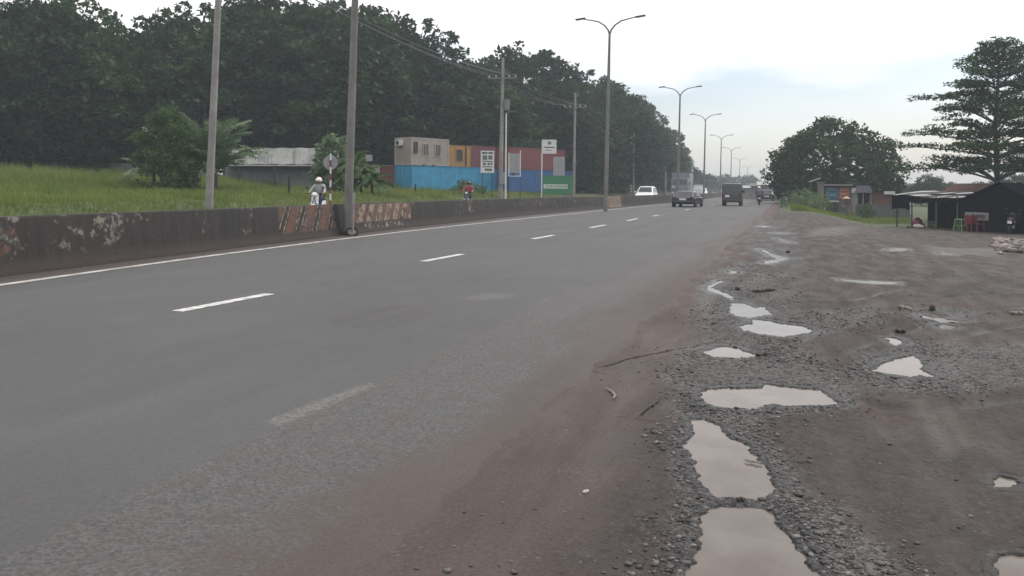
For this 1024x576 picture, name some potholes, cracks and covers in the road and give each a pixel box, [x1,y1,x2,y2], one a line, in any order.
pothole [692,343,772,361]
pothole [669,497,835,576]
crack [591,340,728,374]
pothole [726,318,827,339]
pothole [749,248,803,266]
pothole [859,353,954,381]
pothole [825,277,911,286]
pothole [974,472,1024,493]
pothole [670,415,788,509]
crack [615,397,680,422]
